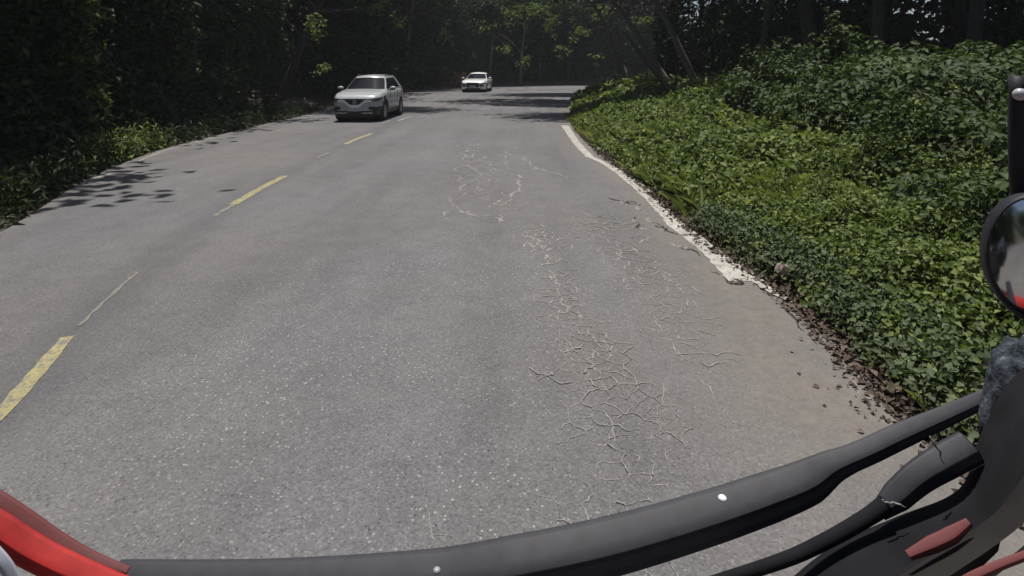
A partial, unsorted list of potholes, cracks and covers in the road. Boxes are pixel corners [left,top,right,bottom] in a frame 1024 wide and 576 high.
crack [442,144,568,223]
crack [522,197,742,576]
